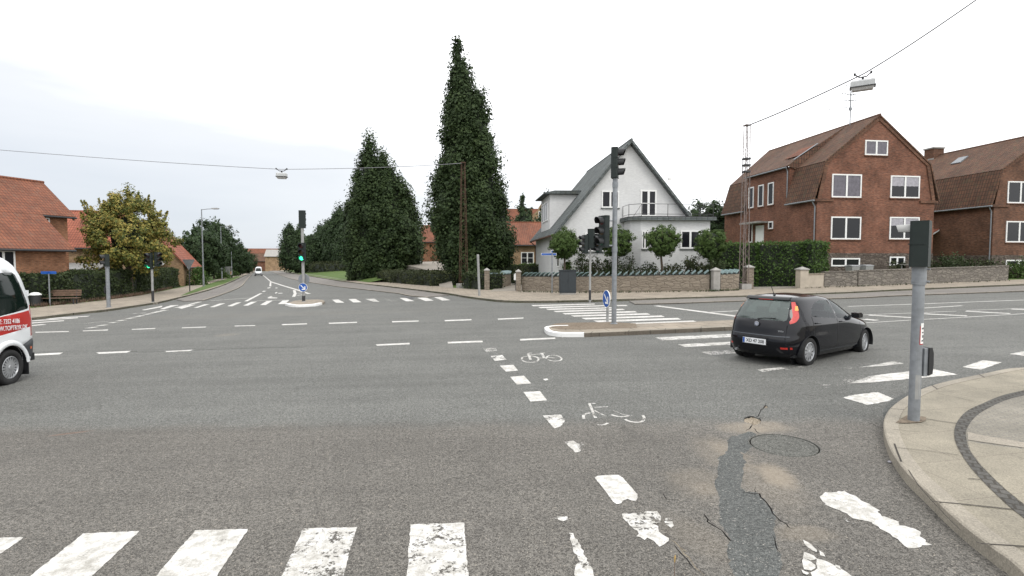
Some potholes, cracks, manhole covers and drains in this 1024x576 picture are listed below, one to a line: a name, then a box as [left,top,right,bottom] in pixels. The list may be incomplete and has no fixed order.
crack [672,514,732,575]
manhole cover [748,434,822,457]
crack [744,489,790,553]
